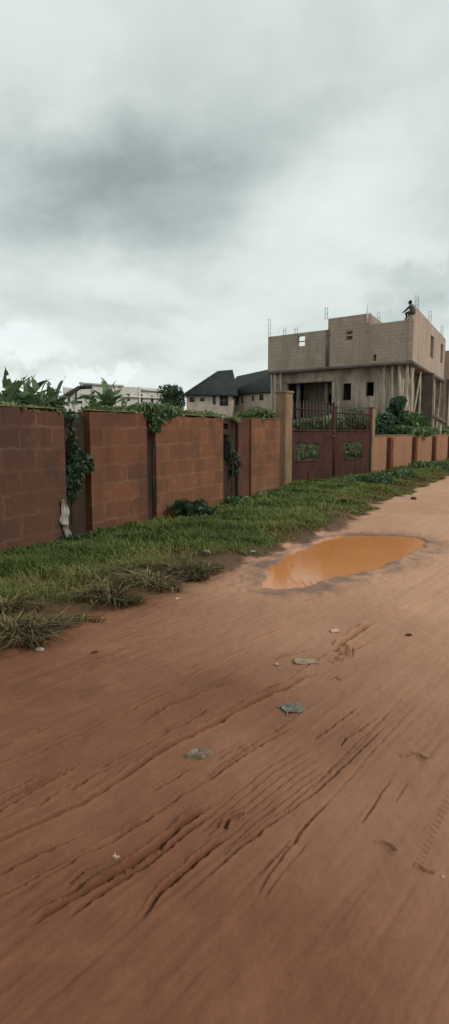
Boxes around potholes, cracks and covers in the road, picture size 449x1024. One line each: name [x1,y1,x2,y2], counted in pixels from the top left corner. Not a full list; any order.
pothole [246,533,440,595]
